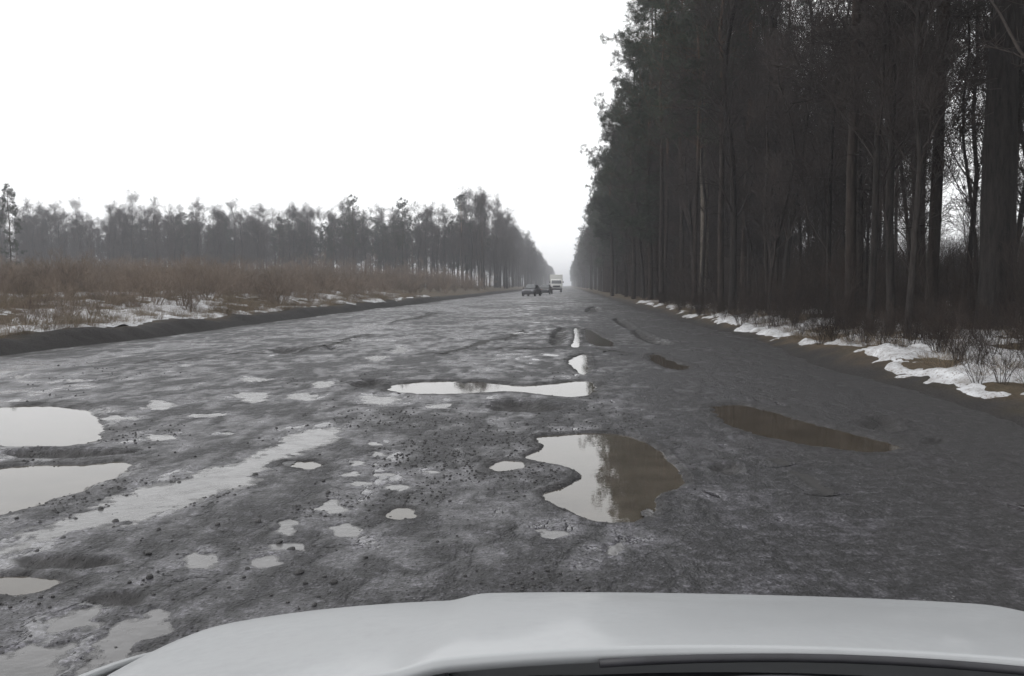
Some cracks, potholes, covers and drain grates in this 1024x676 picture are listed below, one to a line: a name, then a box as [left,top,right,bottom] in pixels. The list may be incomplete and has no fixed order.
pothole [0,423,372,566]
pothole [0,401,126,449]
pothole [472,456,540,475]
pothole [62,597,205,676]
pothole [536,327,574,346]
pothole [511,429,703,527]
pothole [559,352,600,376]
pothole [578,328,628,347]
pothole [640,353,700,370]
pothole [693,402,922,455]
pothole [0,569,89,605]
pothole [375,378,610,398]
